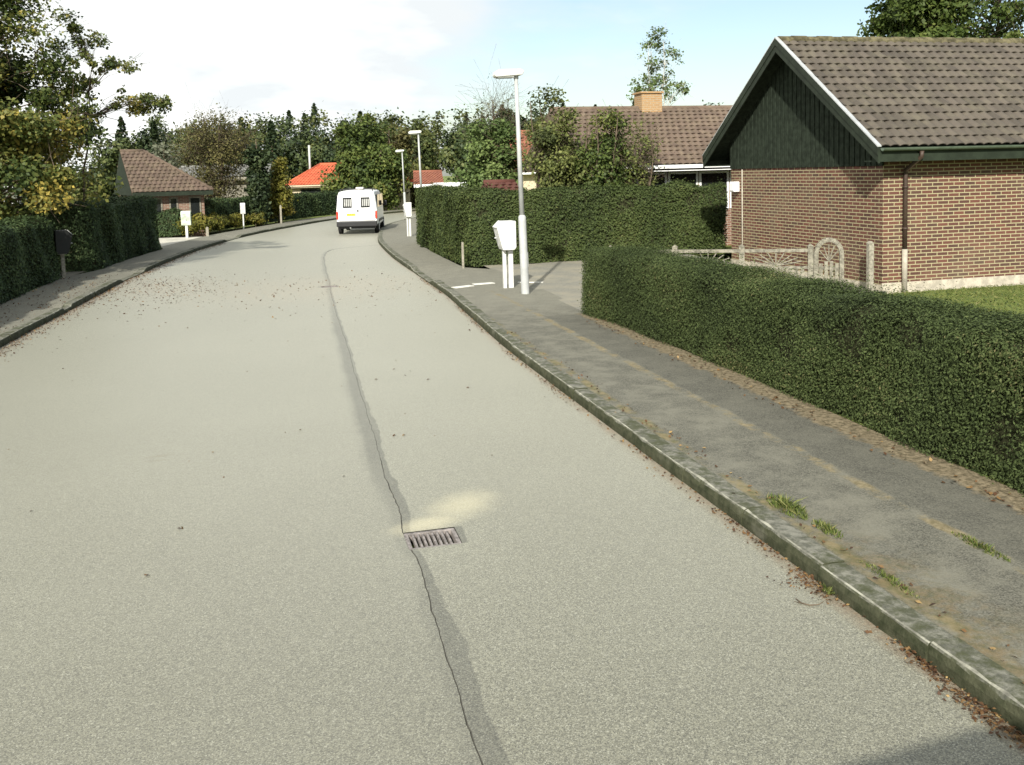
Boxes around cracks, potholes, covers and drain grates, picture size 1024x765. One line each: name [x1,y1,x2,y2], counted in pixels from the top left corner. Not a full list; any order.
drain grate [403,528,461,550]
crack [323,247,483,765]
